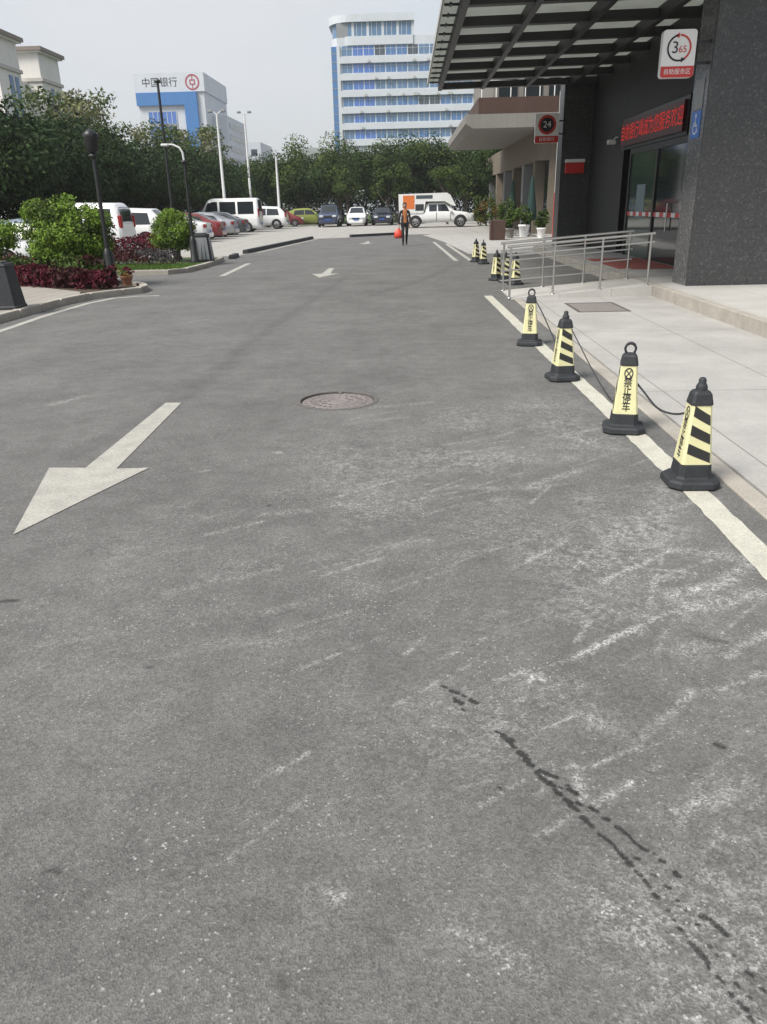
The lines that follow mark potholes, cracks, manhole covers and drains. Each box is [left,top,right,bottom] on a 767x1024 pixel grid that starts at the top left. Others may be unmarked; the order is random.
manhole cover [295,390,379,411]
